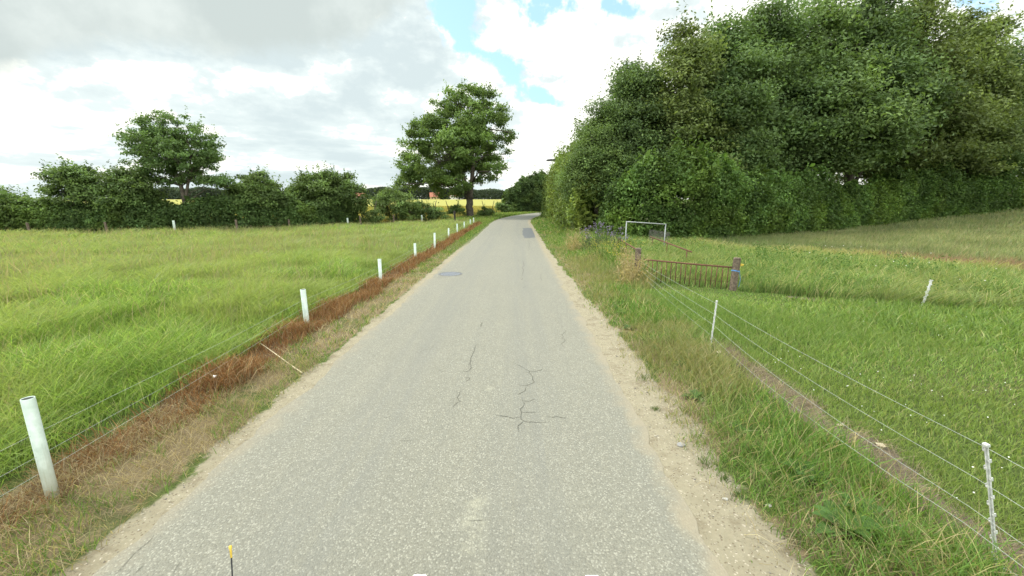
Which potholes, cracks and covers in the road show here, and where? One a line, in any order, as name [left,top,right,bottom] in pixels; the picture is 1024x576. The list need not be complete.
crack [507,363,564,431]
